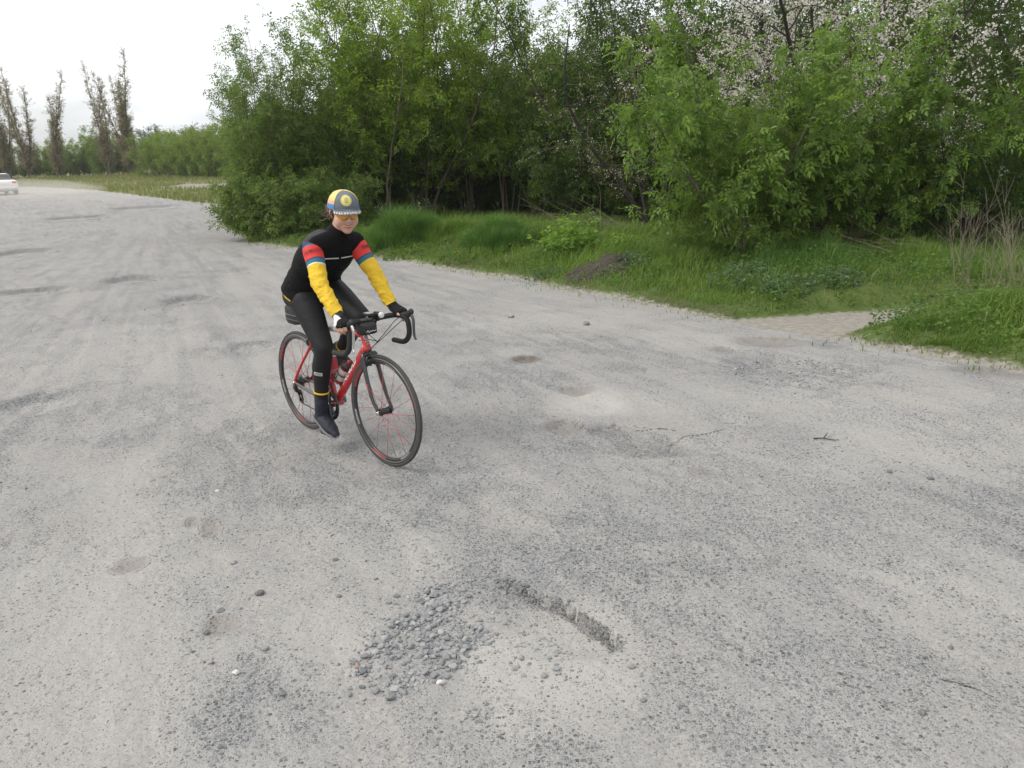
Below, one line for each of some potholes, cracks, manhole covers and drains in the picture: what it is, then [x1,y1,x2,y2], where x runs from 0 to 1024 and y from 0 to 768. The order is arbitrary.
pothole [361,576,629,743]
pothole [199,517,224,538]
pothole [108,556,152,575]
pothole [185,516,202,528]
pothole [556,385,595,397]
pothole [509,355,540,363]
crack [940,679,994,697]
crack [628,428,725,452]
